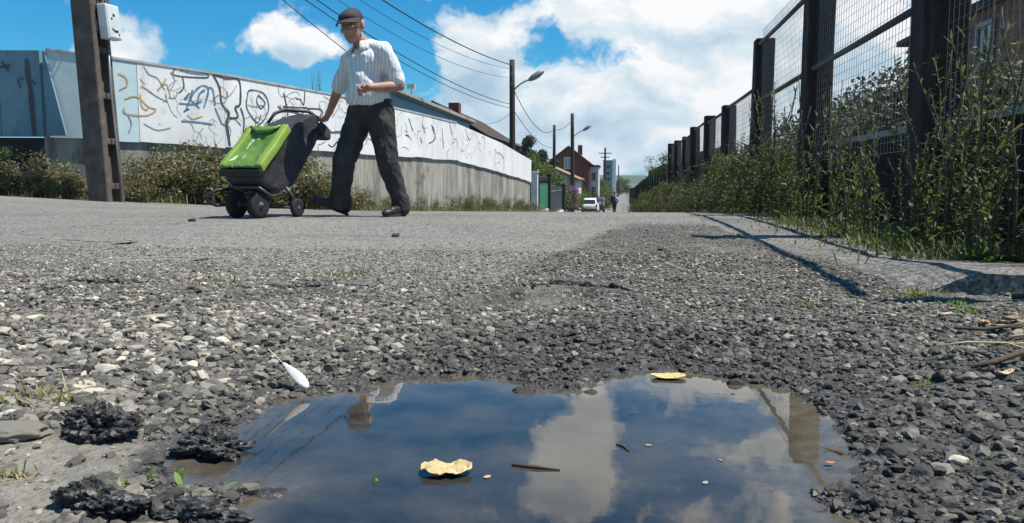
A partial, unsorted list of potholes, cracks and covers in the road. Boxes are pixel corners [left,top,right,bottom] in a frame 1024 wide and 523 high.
crack [534,277,639,301]
pothole [155,366,873,515]
